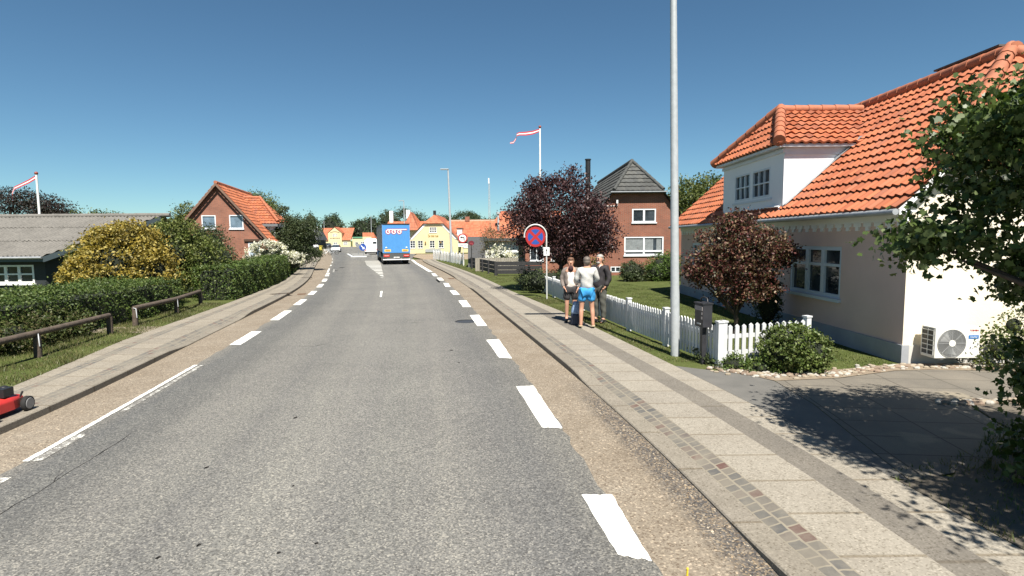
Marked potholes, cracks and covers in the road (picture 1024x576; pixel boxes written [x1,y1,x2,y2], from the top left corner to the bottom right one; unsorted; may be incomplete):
crack [0,433,131,515]
